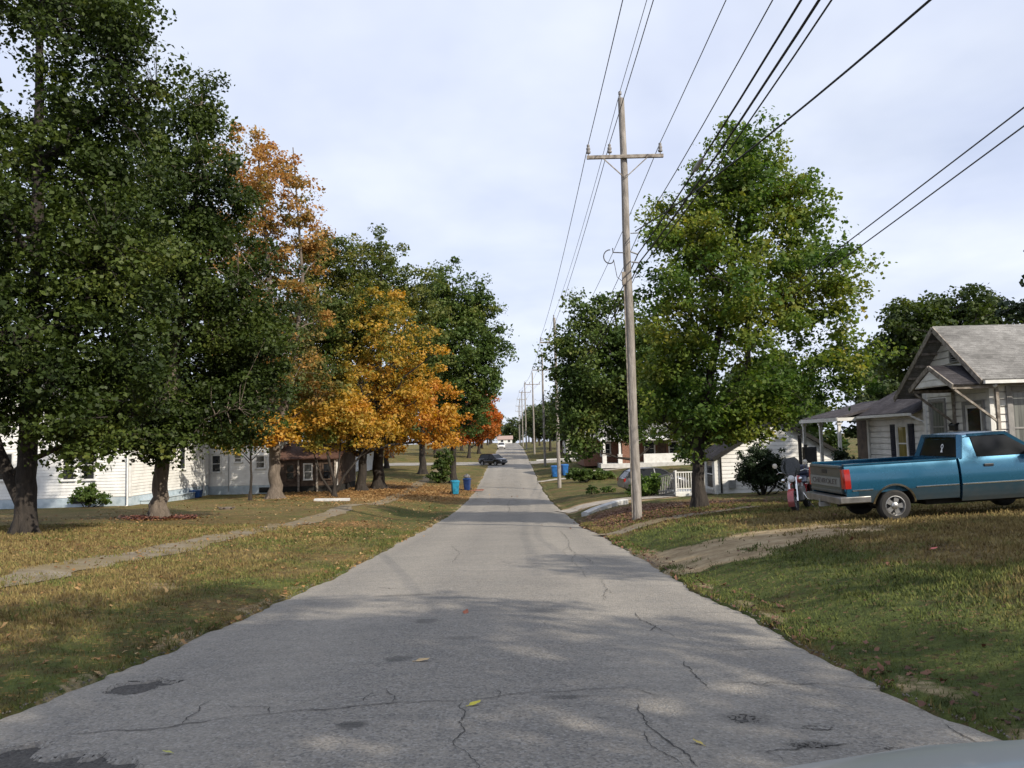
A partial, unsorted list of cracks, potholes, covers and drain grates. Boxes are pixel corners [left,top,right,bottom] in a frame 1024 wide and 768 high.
crack [65,686,661,768]
crack [595,703,698,767]
pothole [105,678,183,695]
